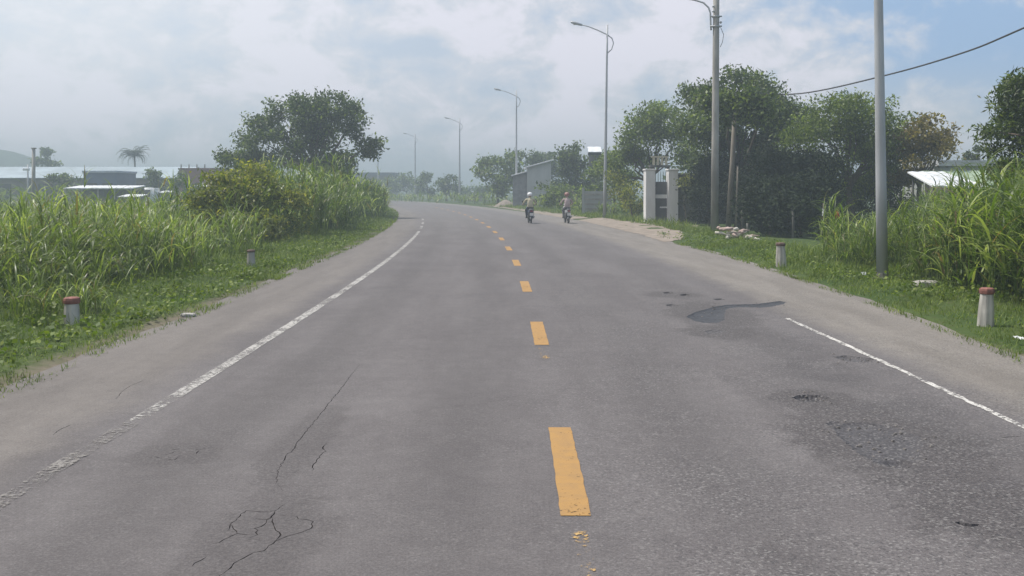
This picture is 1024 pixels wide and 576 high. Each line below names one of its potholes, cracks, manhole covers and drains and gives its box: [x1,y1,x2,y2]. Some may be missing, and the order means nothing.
pothole [790,391,832,403]
pothole [833,353,880,363]
pothole [821,418,937,469]
crack [192,505,314,575]
crack [276,378,349,488]
